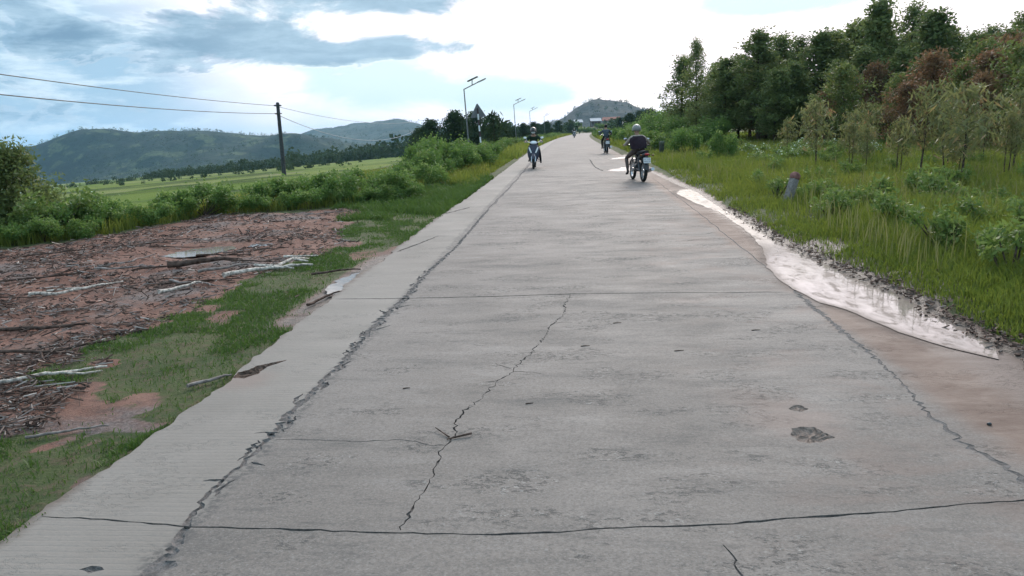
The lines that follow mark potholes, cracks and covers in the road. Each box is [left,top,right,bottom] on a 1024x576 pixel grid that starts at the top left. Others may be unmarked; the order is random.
crack [657,181,1024,485]
crack [140,163,572,576]
crack [723,545,743,576]
pothole [790,426,835,443]
